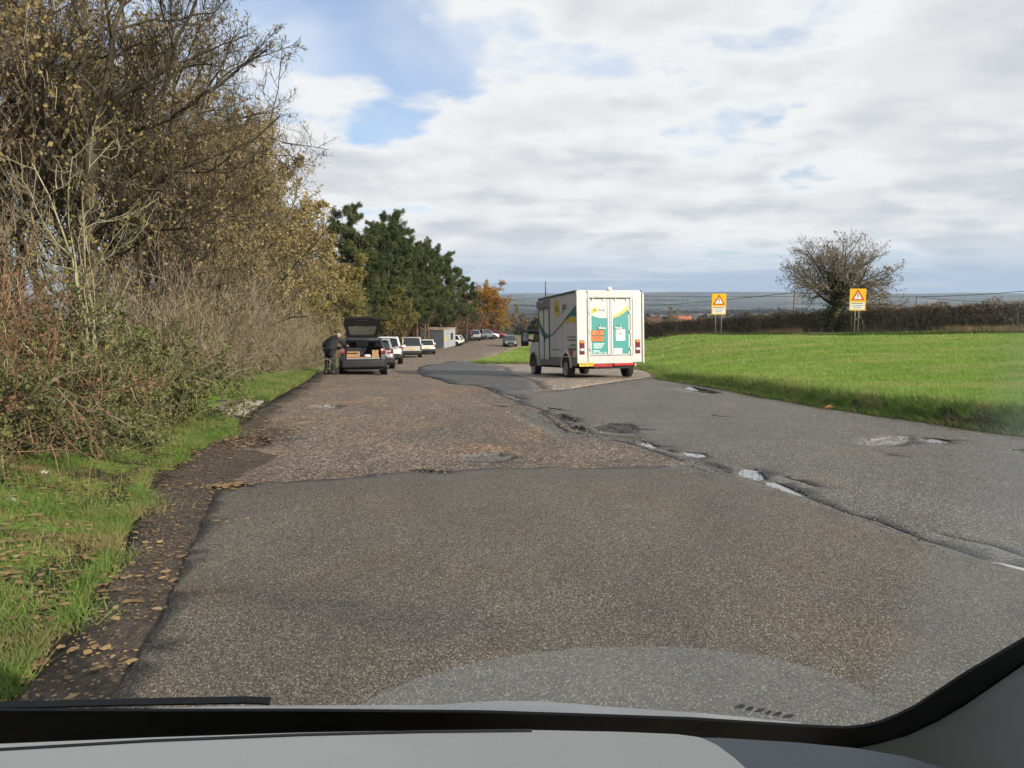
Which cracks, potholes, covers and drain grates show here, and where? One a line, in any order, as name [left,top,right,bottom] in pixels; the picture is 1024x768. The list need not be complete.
pothole [456,453,517,462]
pothole [738,469,768,481]
pothole [683,386,720,394]
pothole [509,411,640,441]
pothole [863,436,913,446]
crack [816,501,1024,571]
pothole [765,482,808,496]
